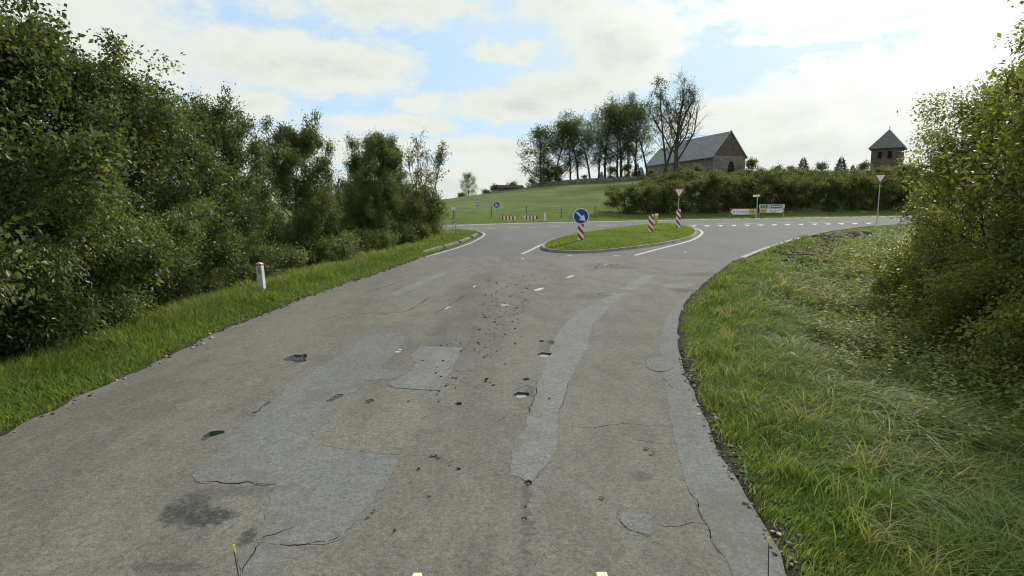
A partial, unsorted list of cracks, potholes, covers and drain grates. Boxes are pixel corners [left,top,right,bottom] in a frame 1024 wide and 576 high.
crack [616,489,723,555]
pothole [283,354,308,363]
crack [242,530,338,572]
pothole [201,430,225,441]
